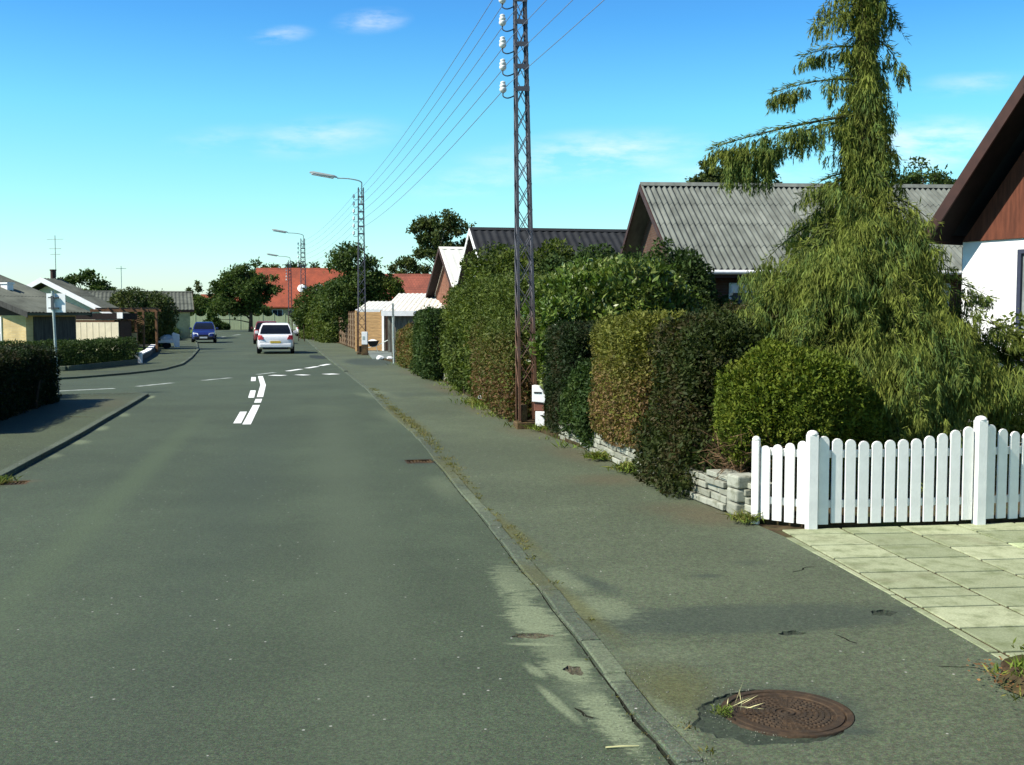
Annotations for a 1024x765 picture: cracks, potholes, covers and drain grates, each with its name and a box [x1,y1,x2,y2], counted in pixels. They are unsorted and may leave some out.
manhole cover [721,689,855,739]
pothole [563,665,583,676]
